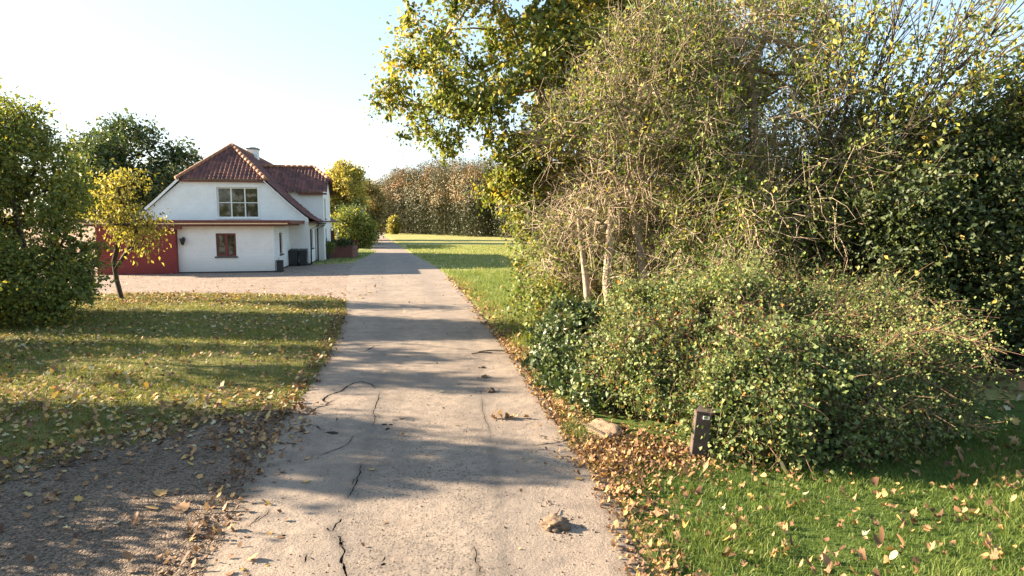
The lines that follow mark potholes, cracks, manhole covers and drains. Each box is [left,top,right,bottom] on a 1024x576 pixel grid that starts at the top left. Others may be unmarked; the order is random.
crack [304,381,376,430]
crack [327,519,347,576]
